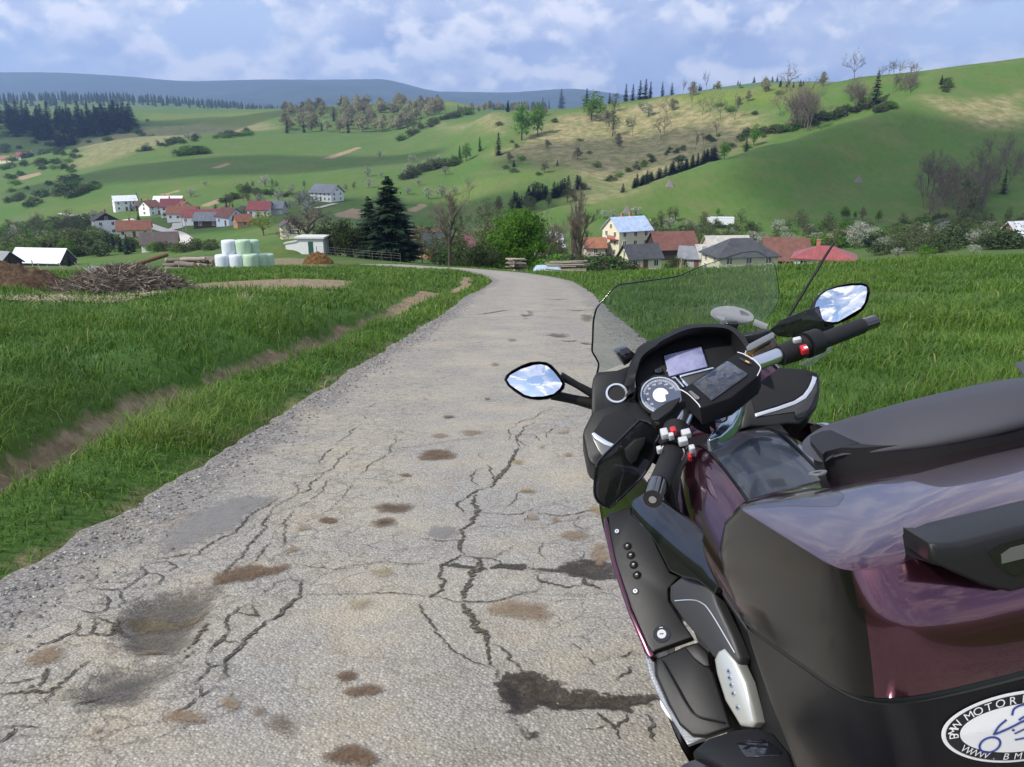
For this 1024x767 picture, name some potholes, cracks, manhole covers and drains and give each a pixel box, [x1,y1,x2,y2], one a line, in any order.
crack [0,660,107,706]
crack [36,403,604,712]
crack [0,725,37,742]
